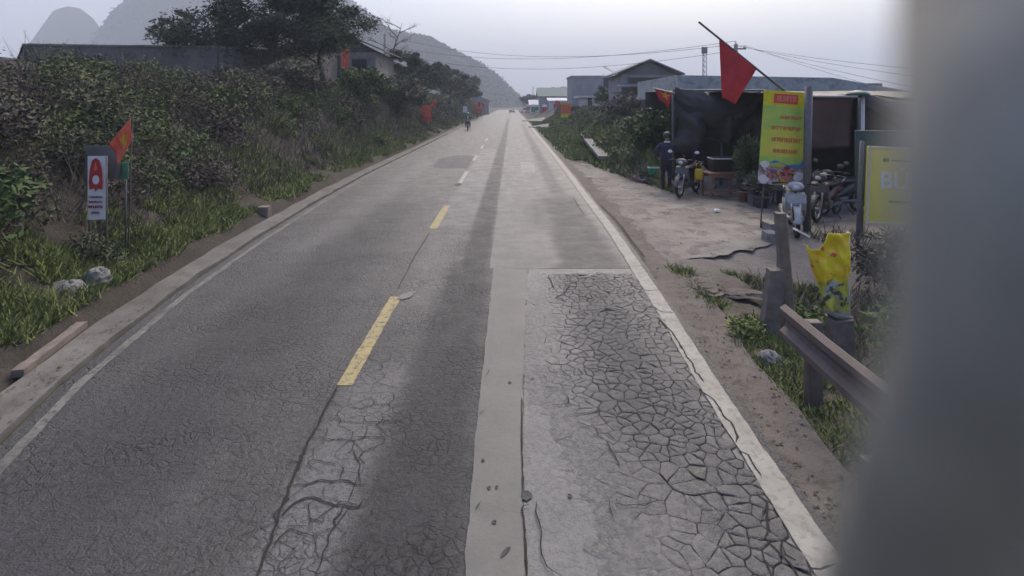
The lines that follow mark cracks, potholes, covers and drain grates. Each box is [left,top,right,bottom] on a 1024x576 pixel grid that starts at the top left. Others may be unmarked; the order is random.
crack [1,229,491,576]
crack [523,204,822,576]
